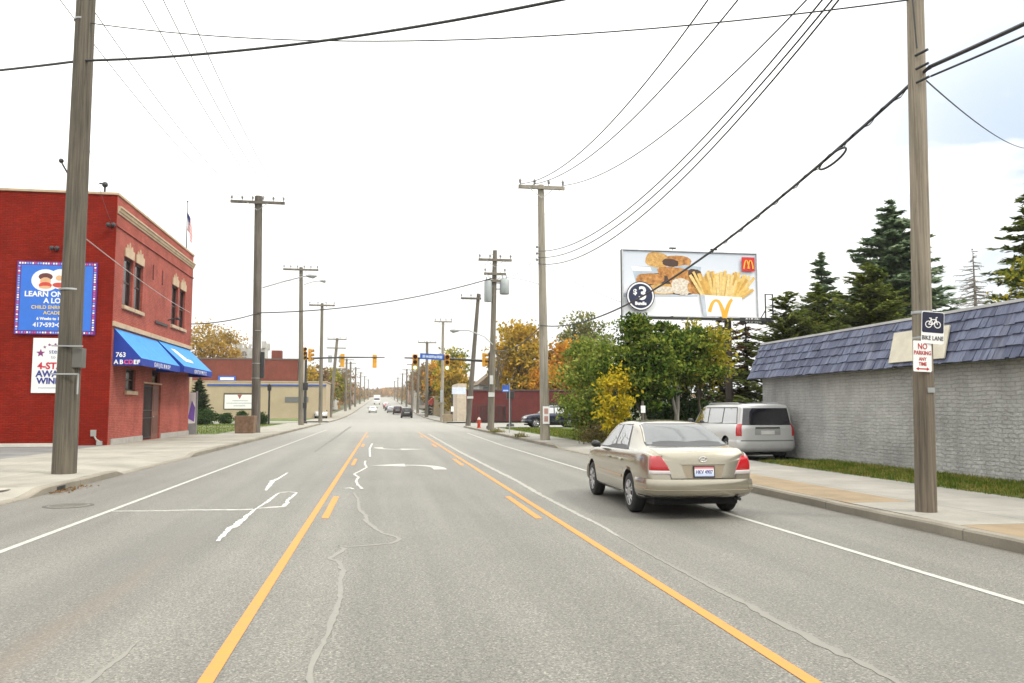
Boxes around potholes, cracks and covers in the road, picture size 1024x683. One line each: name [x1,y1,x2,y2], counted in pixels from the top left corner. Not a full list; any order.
crack [83,644,137,683]
crack [343,443,373,489]
